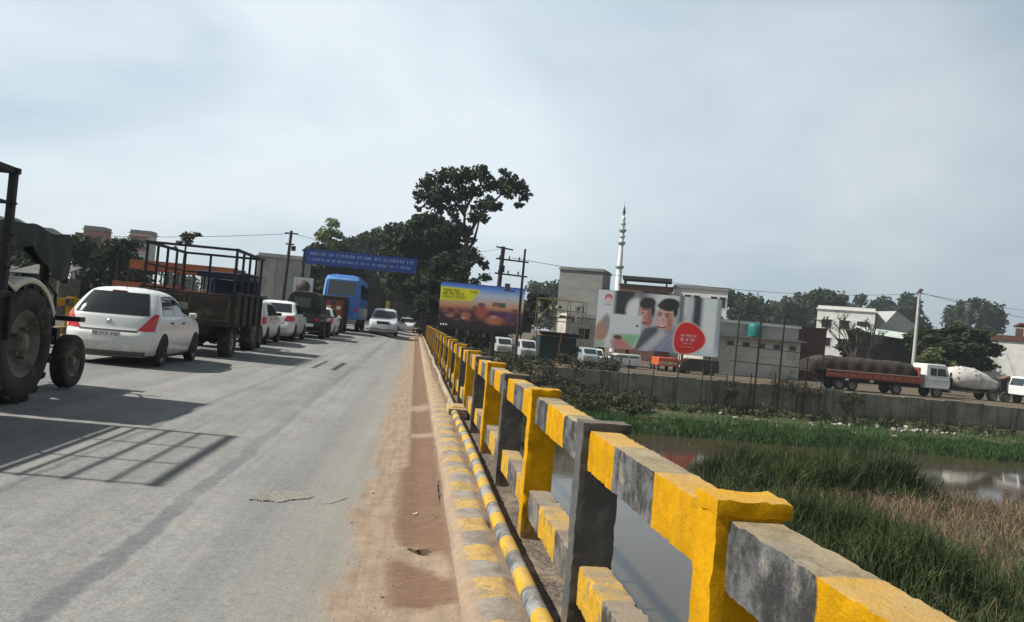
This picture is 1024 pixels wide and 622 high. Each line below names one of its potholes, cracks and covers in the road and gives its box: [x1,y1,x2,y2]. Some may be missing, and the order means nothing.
pothole [407,548,432,556]
